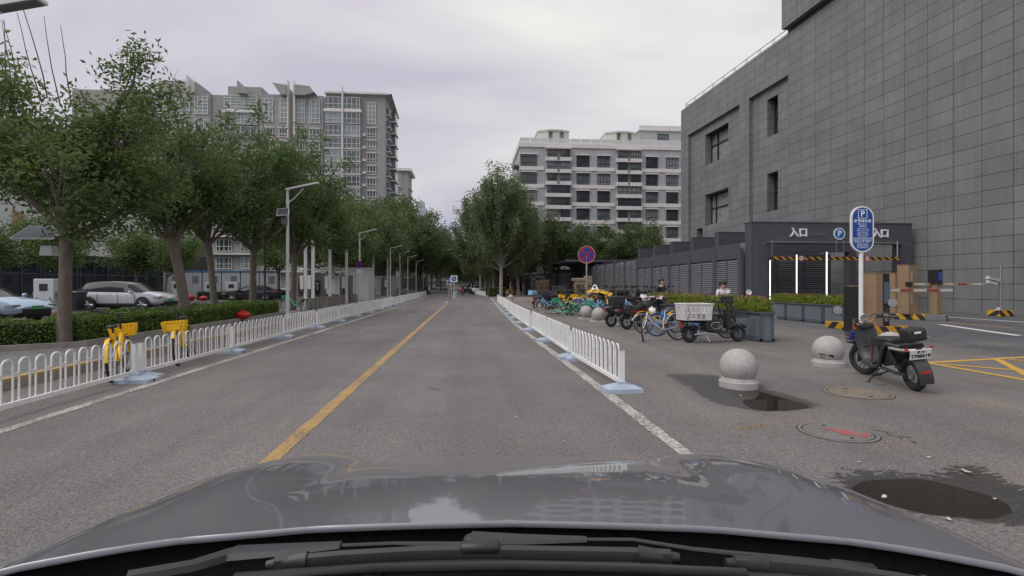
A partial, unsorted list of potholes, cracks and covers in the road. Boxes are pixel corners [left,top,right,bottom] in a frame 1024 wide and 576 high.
manhole cover [822,387,896,400]
manhole cover [796,422,882,443]
